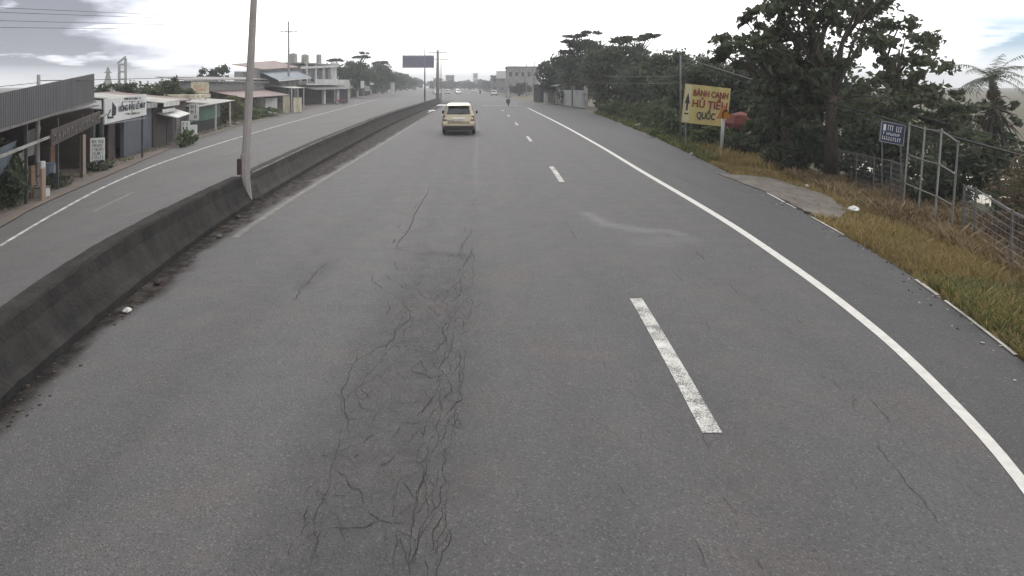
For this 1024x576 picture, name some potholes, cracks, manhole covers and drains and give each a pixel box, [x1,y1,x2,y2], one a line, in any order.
crack [288,201,475,576]
